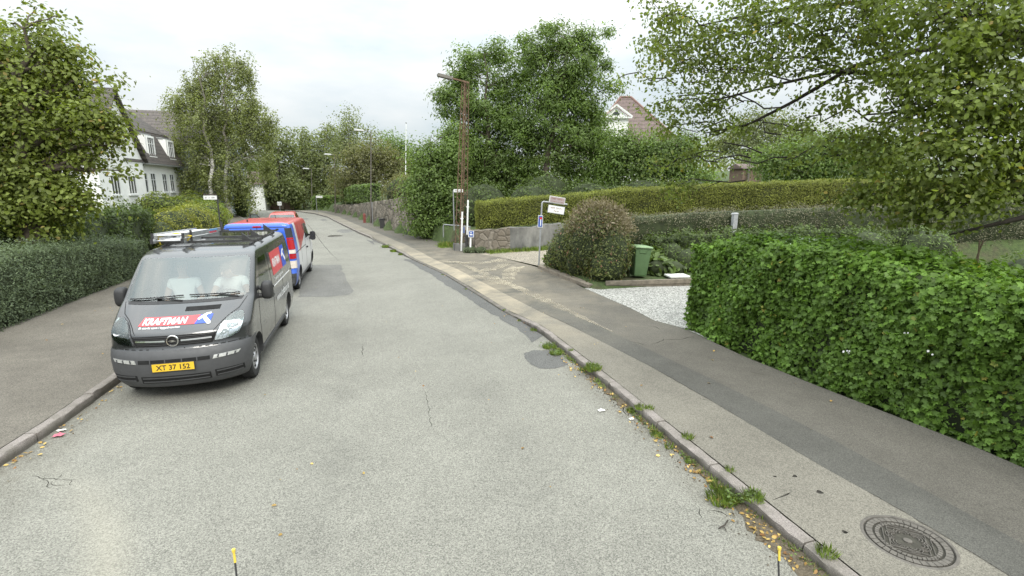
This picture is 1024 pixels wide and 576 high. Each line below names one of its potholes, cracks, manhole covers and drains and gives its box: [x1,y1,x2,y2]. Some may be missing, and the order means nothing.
manhole cover [860,515,961,570]
